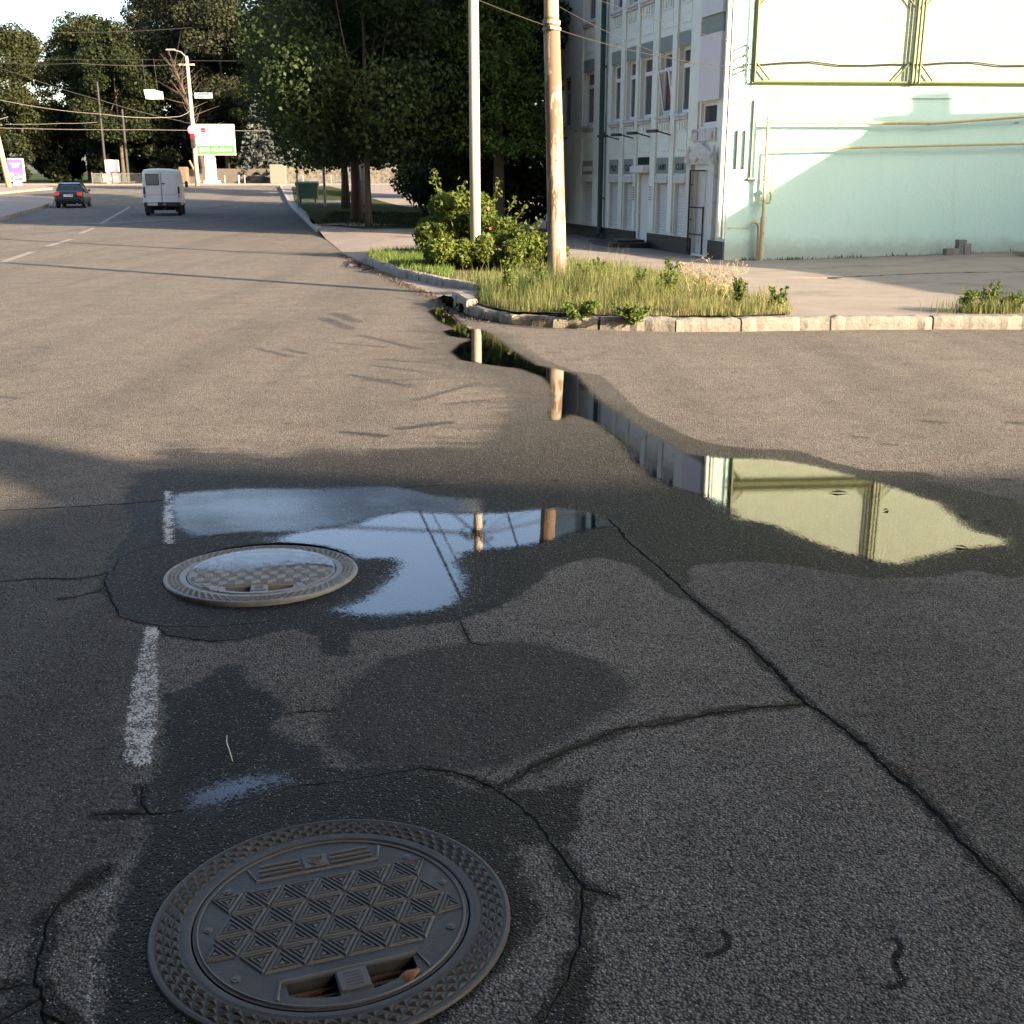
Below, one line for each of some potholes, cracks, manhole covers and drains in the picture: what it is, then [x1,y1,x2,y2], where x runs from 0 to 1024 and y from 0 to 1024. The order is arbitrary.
manhole cover [163,545,358,607]
manhole cover [147,819,511,1024]
crack [1,533,327,642]
crack [0,870,106,1024]
crack [96,767,614,1024]
